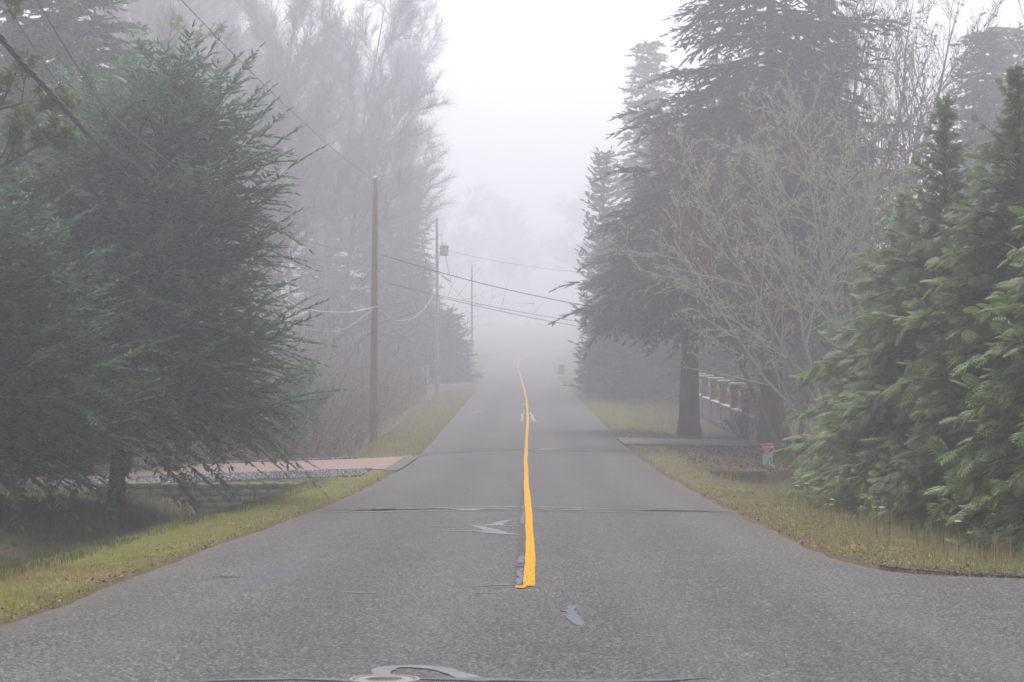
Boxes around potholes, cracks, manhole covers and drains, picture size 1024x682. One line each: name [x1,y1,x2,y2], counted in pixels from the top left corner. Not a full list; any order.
manhole cover [348,674,420,682]
